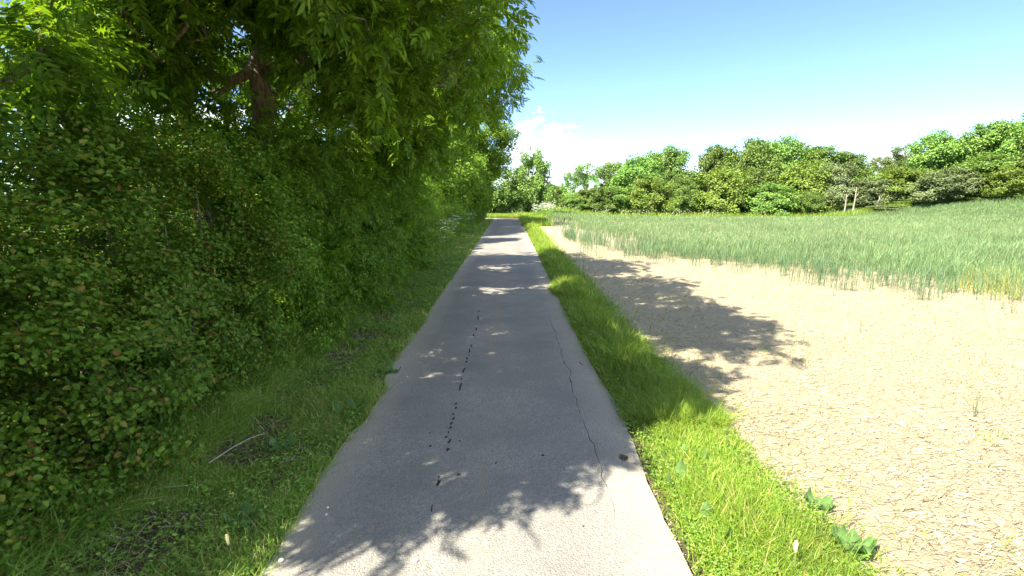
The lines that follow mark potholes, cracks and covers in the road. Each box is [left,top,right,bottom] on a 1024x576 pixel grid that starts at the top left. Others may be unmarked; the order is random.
crack [549,317,615,518]
crack [431,310,479,512]
